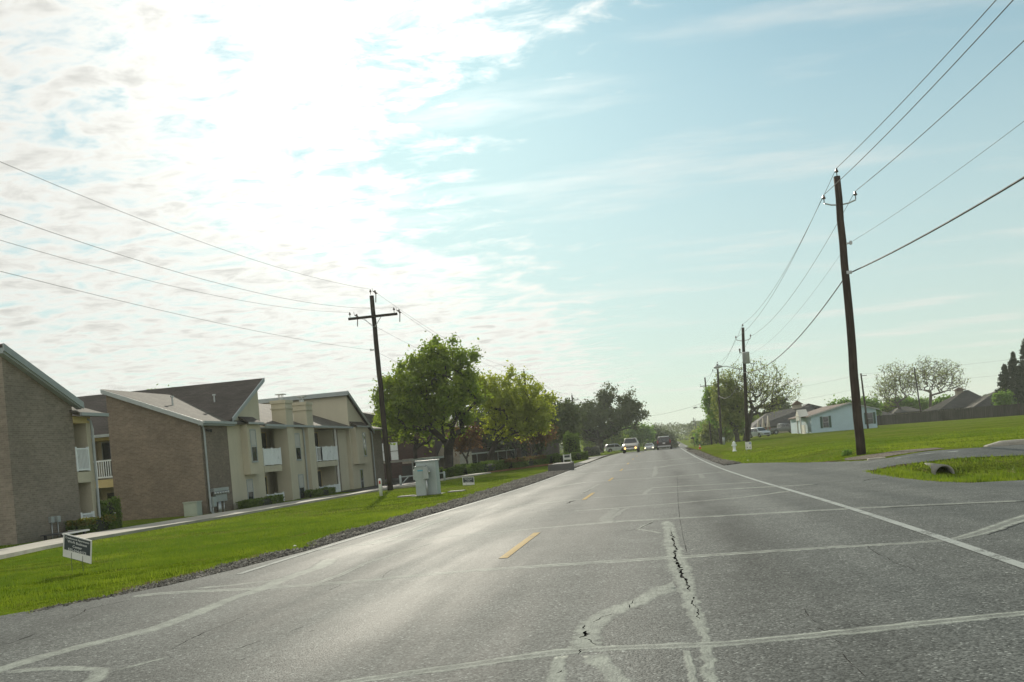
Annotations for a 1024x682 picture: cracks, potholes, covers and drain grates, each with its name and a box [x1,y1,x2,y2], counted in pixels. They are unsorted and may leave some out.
crack [544,521,722,682]
